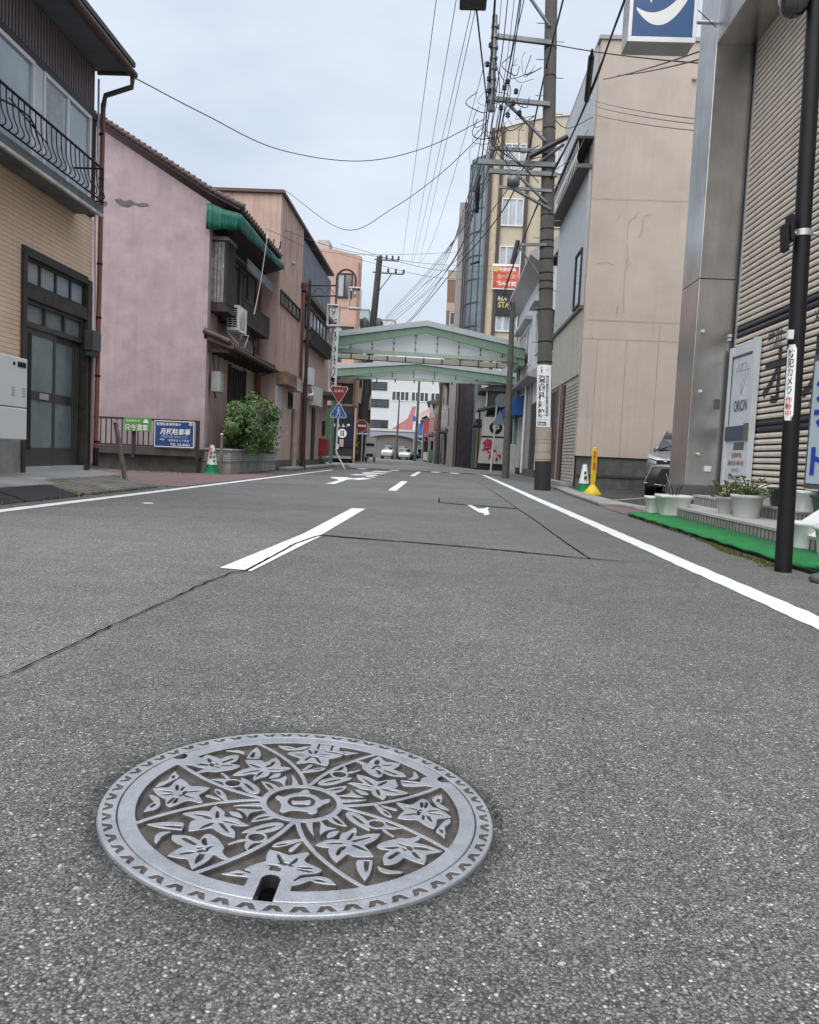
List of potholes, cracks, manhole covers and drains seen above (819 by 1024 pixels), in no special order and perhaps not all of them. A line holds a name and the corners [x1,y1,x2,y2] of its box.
manhole cover [96,733,493,921]
